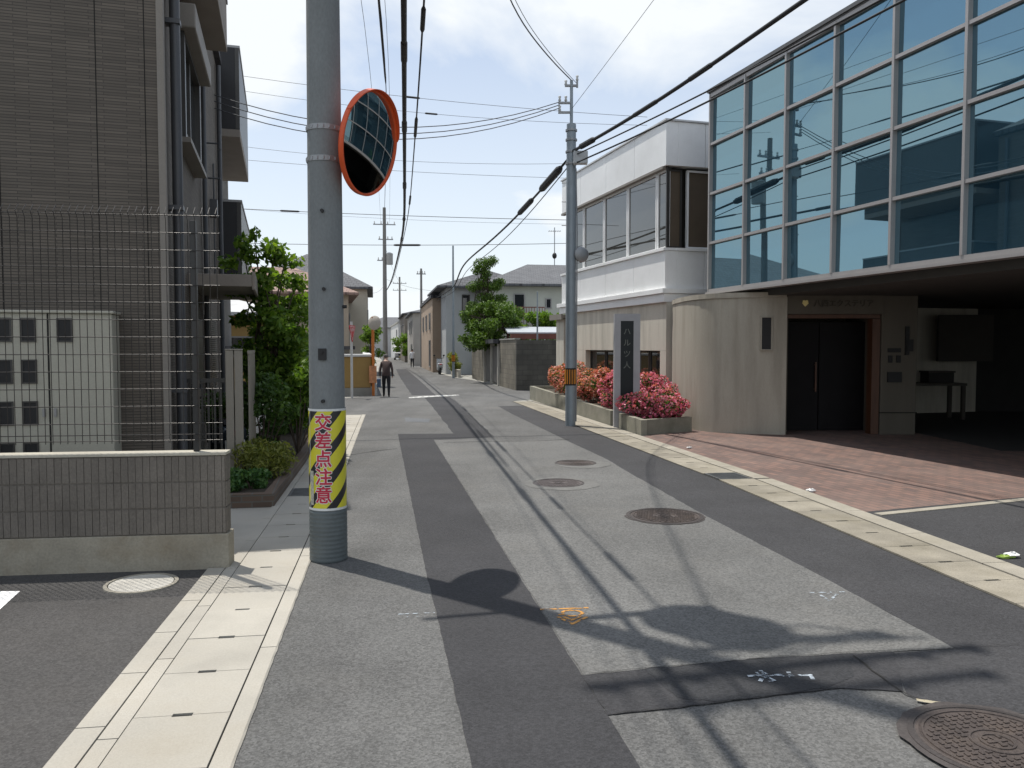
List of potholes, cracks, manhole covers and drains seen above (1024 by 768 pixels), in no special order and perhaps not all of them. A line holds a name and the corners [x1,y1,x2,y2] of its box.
manhole cover [555,460,610,468]
manhole cover [896,702,1024,768]
manhole cover [103,573,179,595]
manhole cover [624,508,705,525]
manhole cover [525,477,600,490]
